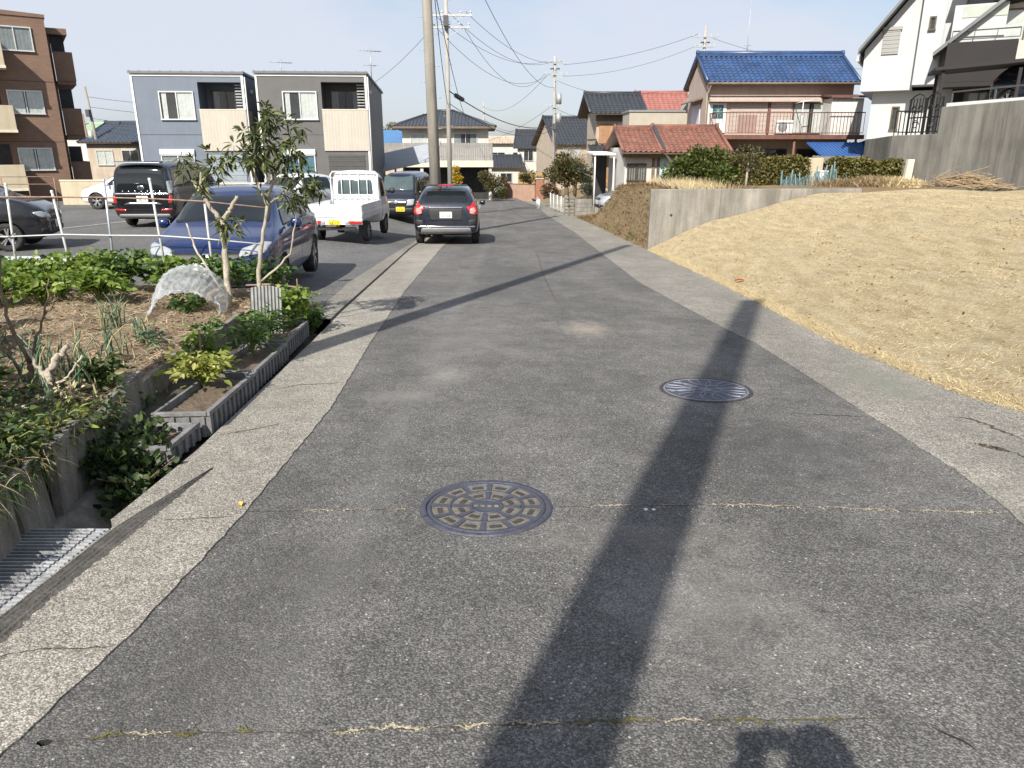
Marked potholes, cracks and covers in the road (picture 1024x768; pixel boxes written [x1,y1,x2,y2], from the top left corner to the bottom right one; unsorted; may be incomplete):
manhole cover [659,378,753,403]
manhole cover [420,480,553,537]
crack [931,726,977,750]
crack [950,416,1024,457]
drain grate [0,528,110,614]
